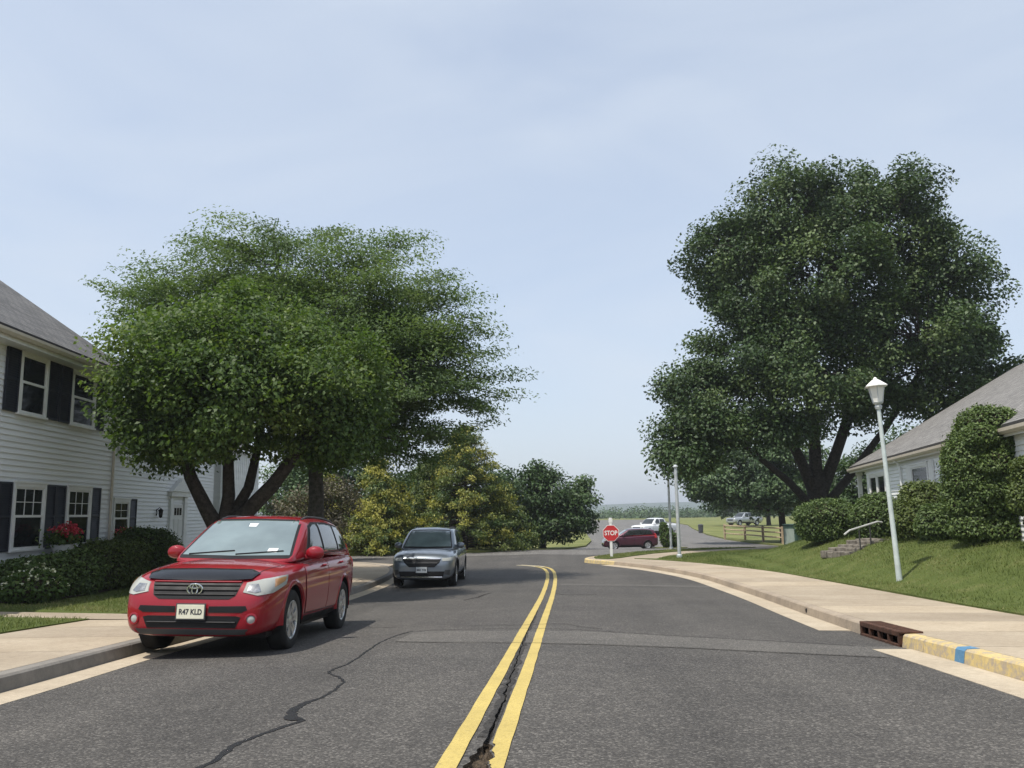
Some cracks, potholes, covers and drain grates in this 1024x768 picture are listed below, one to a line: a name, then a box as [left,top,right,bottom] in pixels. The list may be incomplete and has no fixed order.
crack [477,612,600,749]
drain grate [859,621,923,647]
